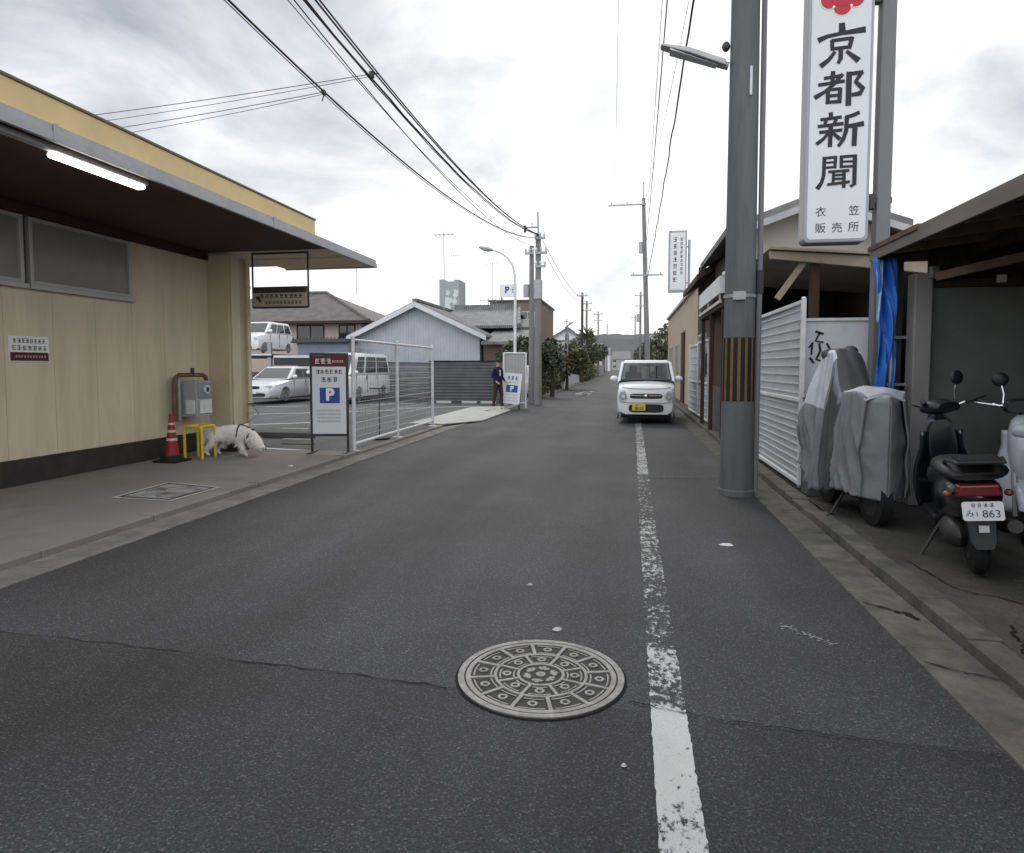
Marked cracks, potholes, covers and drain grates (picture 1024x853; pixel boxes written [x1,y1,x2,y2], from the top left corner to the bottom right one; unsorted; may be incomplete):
crack [1009,625,1024,653]
manhole cover [111,482,220,501]
manhole cover [455,640,627,721]
crack [908,561,1024,604]
crack [925,661,1000,680]
crack [864,602,919,619]
crack [0,631,446,688]
